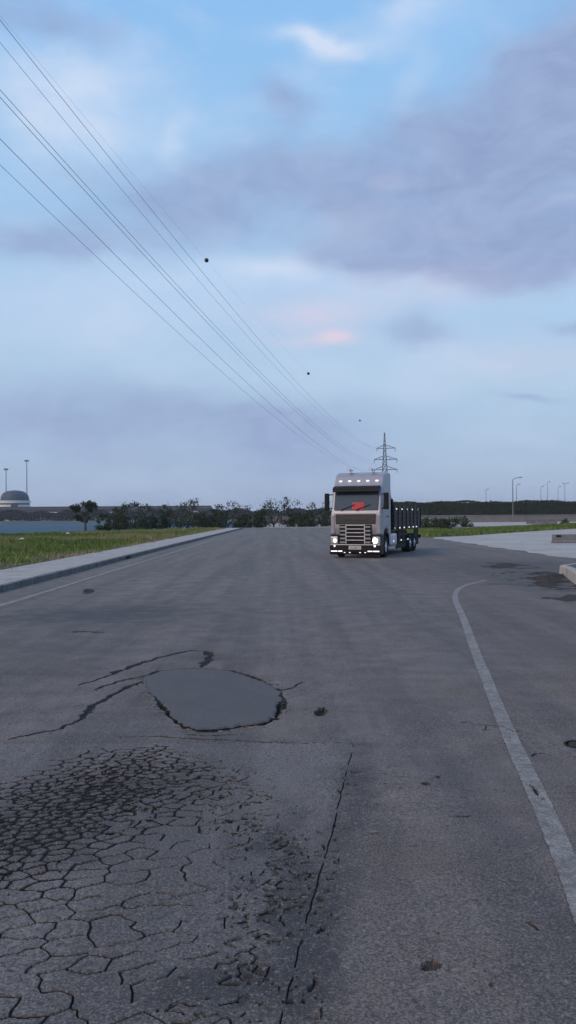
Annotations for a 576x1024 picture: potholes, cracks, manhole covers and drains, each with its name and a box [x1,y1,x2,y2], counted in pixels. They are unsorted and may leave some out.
pothole [422,961,442,971]
pothole [142,668,285,732]
crack [0,651,348,1024]
